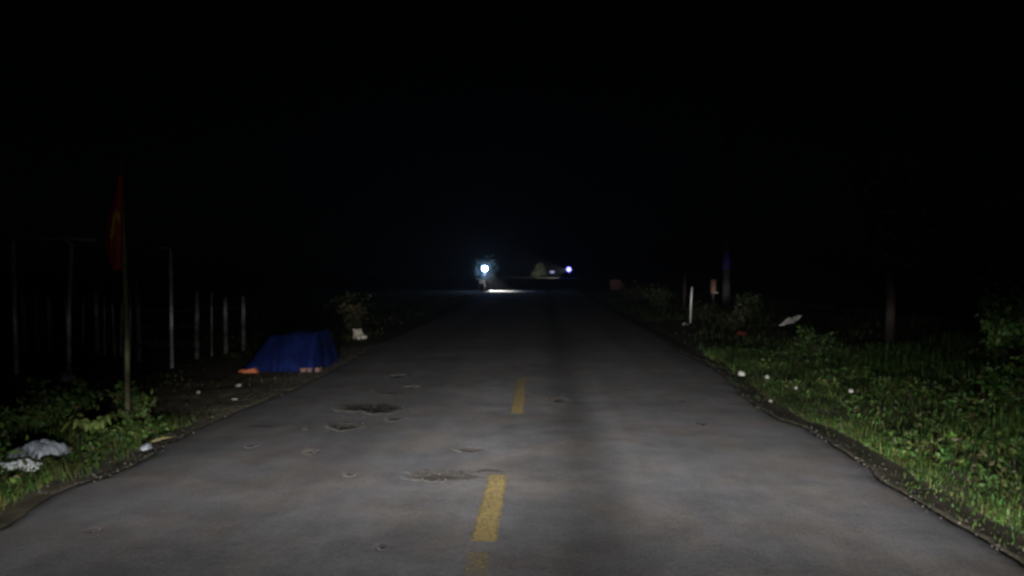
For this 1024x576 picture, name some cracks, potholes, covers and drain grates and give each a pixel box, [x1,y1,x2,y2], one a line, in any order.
pothole [546,396,569,404]
pothole [324,422,366,432]
pothole [331,401,412,415]
pothole [400,469,487,482]
